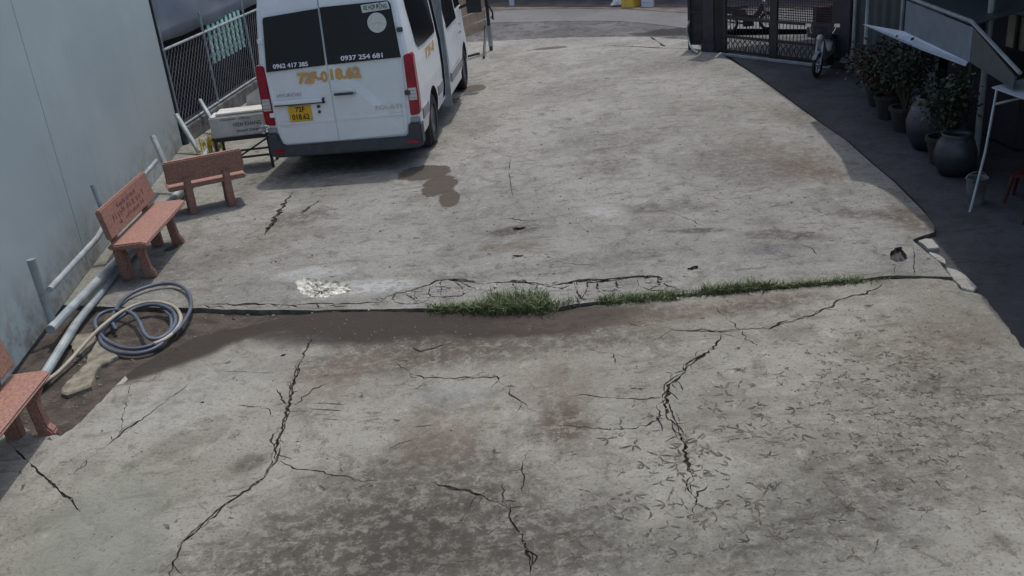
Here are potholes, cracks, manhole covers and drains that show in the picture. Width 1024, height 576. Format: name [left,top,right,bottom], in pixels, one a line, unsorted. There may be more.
crack [158,330,382,575]
crack [432,452,538,575]
crack [205,210,832,309]
crack [560,245,915,522]
pothole [890,247,908,262]
crack [397,343,534,411]
crack [264,192,319,234]
